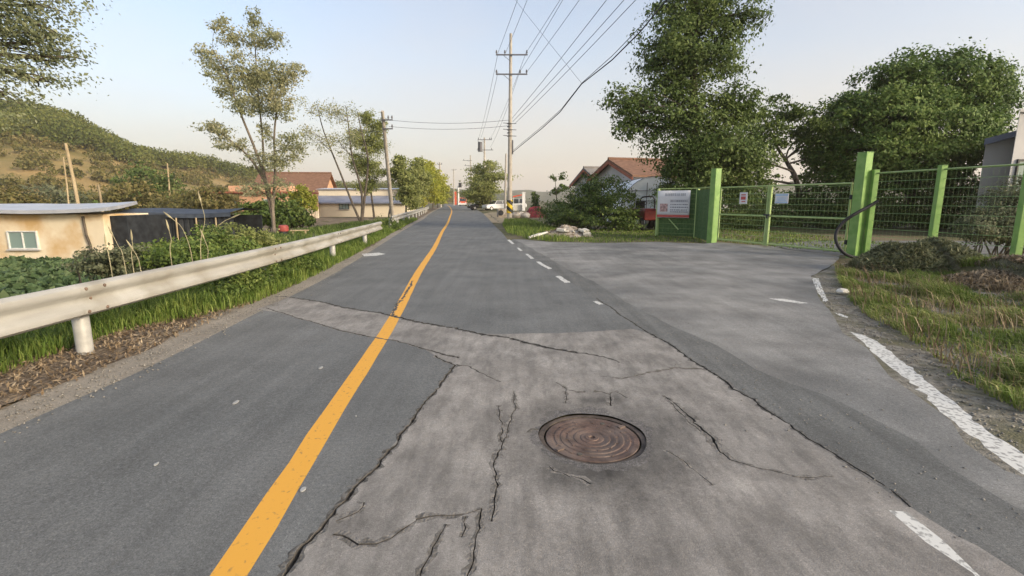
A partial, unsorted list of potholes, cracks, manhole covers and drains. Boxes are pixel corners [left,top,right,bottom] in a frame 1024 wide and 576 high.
manhole cover [529,406,655,472]
crack [266,281,834,576]
